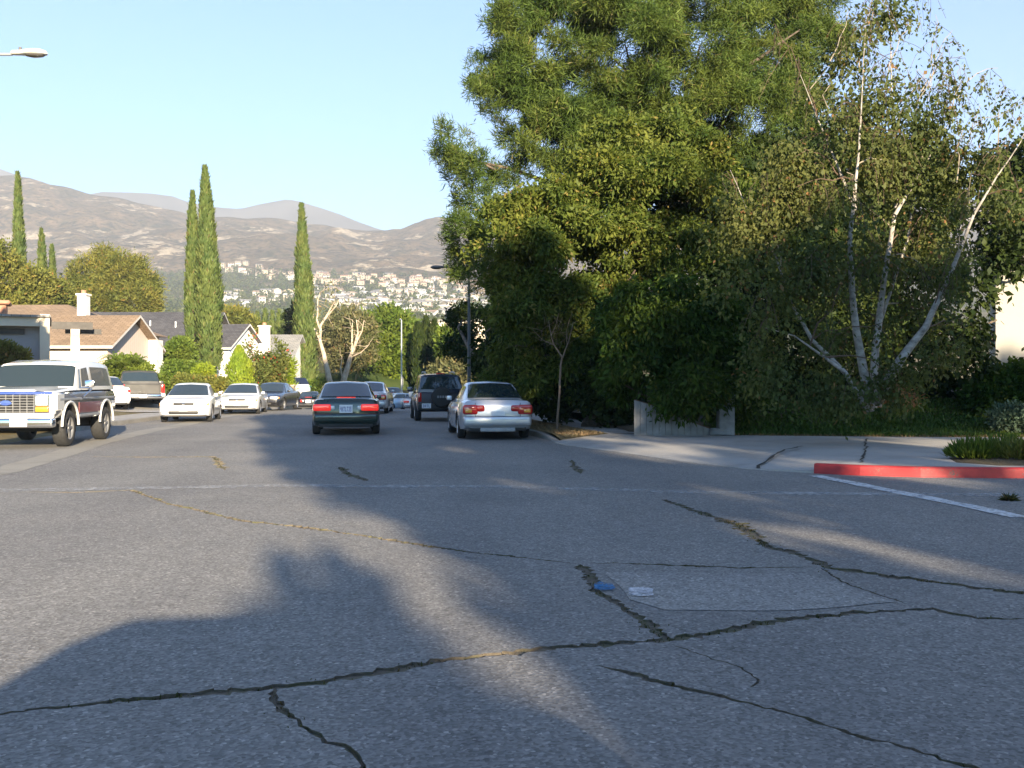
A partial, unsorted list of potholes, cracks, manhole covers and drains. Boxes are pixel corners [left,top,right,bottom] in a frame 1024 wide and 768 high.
crack [756,446,800,468]
crack [568,460,586,474]
crack [91,456,230,470]
crack [0,490,1024,768]
crack [338,467,369,481]
